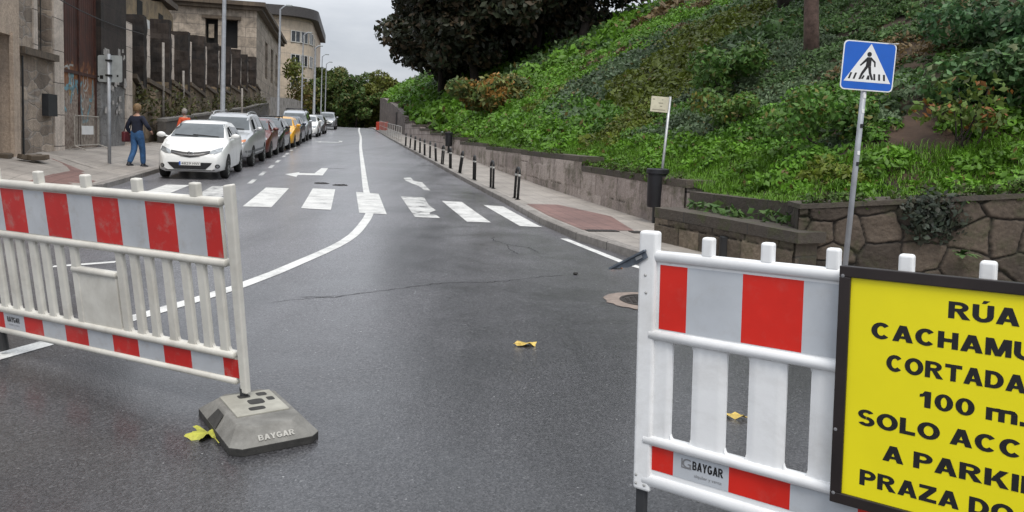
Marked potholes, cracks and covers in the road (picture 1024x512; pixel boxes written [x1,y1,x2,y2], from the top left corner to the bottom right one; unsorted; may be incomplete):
manhole cover [603,292,638,309]
crack [277,275,563,302]
